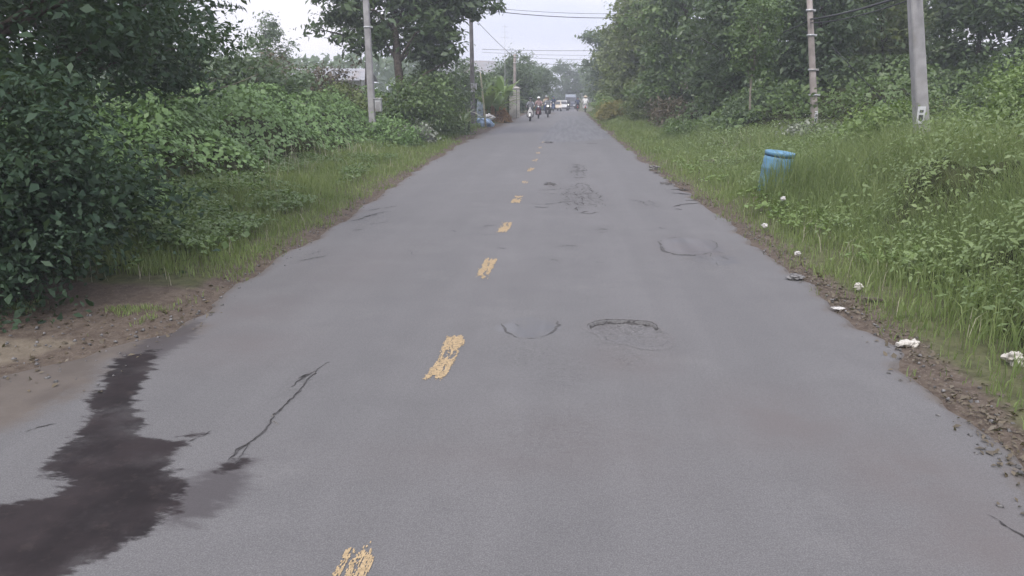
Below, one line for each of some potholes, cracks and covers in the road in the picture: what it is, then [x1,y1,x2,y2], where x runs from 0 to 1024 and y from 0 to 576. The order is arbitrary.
crack [228,362,328,463]
pothole [580,318,677,350]
